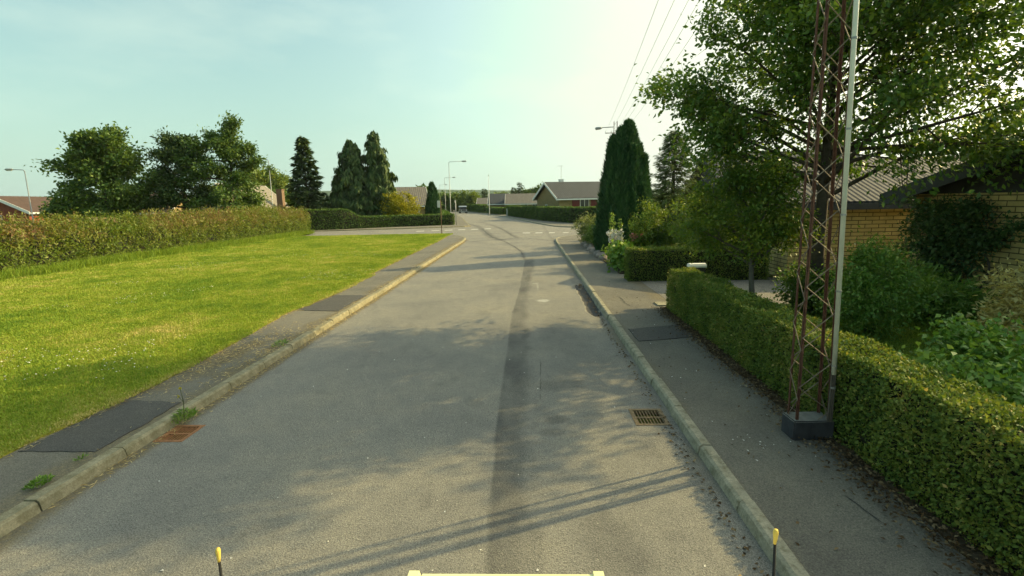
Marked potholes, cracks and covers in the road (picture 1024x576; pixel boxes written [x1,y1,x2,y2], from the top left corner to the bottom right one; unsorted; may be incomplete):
drain grate [628,408,671,426]
drain grate [153,425,205,442]
